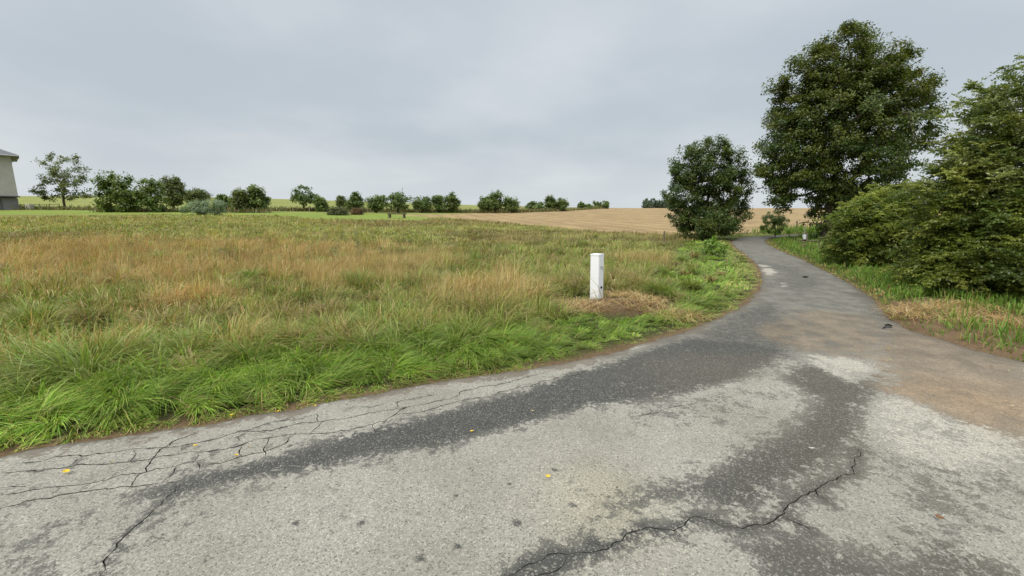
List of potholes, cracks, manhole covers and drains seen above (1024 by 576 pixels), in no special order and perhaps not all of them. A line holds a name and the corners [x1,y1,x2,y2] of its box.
crack [516,450,861,576]
crack [4,372,583,571]
